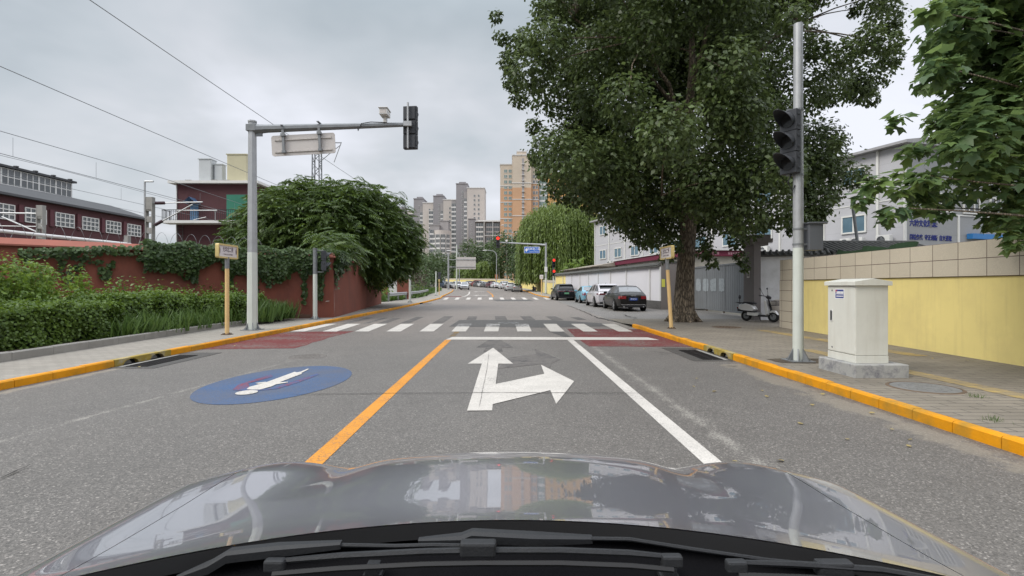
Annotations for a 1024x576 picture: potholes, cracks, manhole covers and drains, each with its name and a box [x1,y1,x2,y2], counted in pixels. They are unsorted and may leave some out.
drain grate [663,345,738,361]
drain grate [108,350,219,369]
manhole cover [885,381,967,395]
